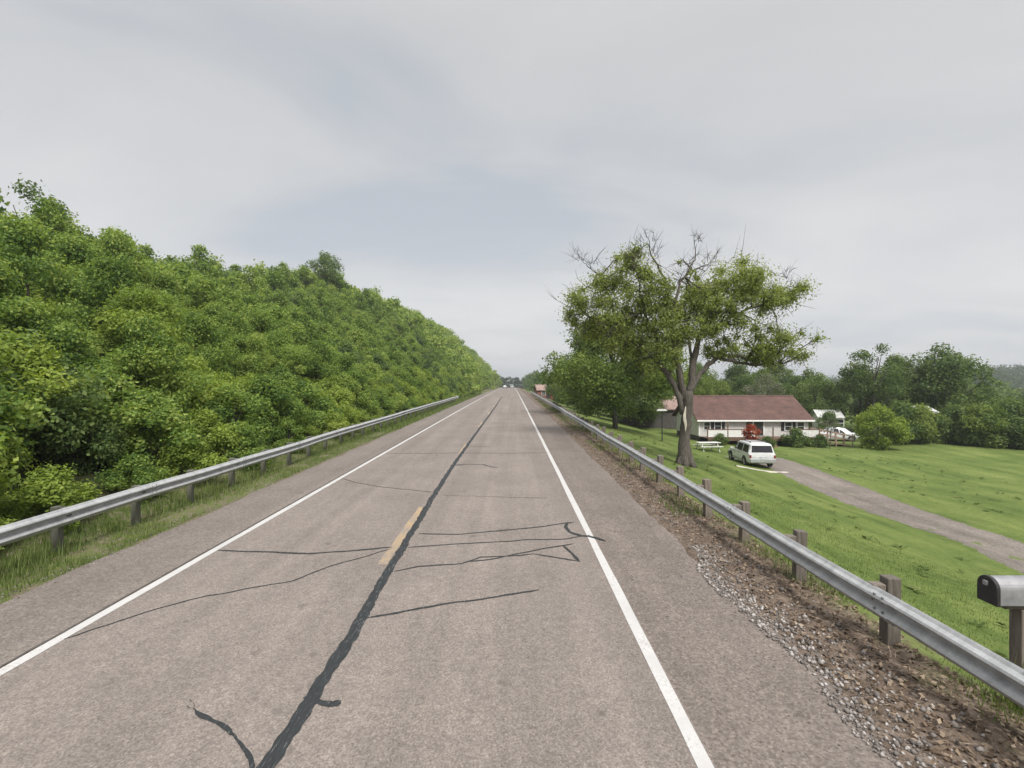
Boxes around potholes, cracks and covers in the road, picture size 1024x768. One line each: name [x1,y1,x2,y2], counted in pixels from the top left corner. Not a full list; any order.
crack [0,425,431,667]
